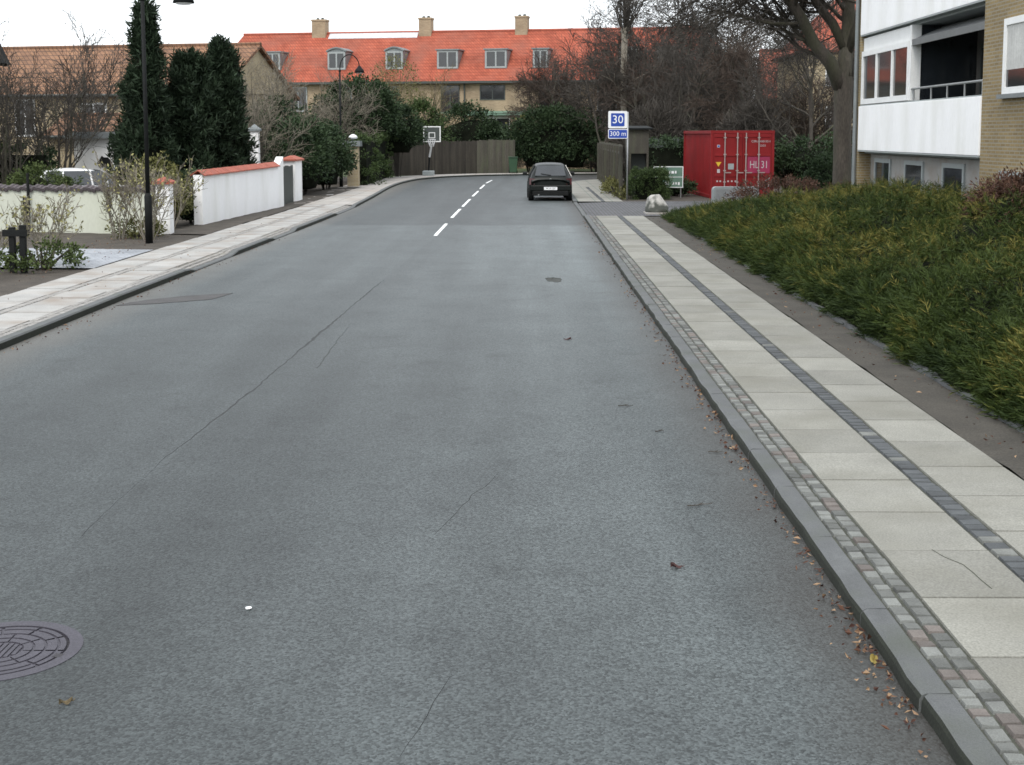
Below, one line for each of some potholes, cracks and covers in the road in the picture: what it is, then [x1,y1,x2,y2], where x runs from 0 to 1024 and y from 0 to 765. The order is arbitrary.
crack [933,550,992,589]
manhole cover [0,621,84,681]
crack [436,479,493,533]
crack [400,677,450,756]
